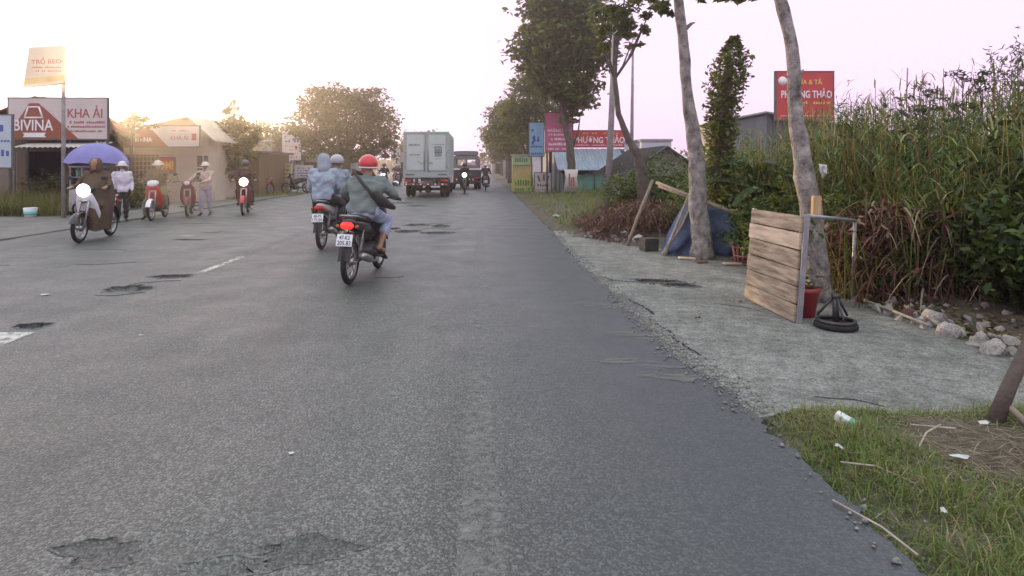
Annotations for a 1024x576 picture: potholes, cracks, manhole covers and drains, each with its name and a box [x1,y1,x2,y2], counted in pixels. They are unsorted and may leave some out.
crack [603,277,701,356]
pothole [100,284,157,293]
pothole [42,535,152,571]
pothole [245,529,373,574]
crack [814,396,884,407]
pothole [10,322,56,330]
